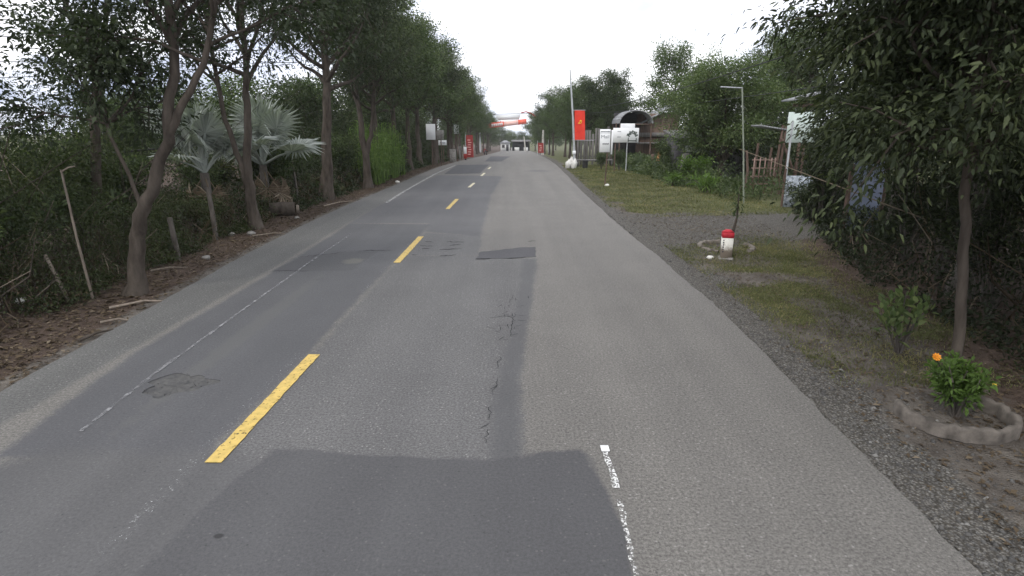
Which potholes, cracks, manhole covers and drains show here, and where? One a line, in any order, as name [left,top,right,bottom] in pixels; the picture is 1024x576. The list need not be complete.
crack [487,296,529,340]
